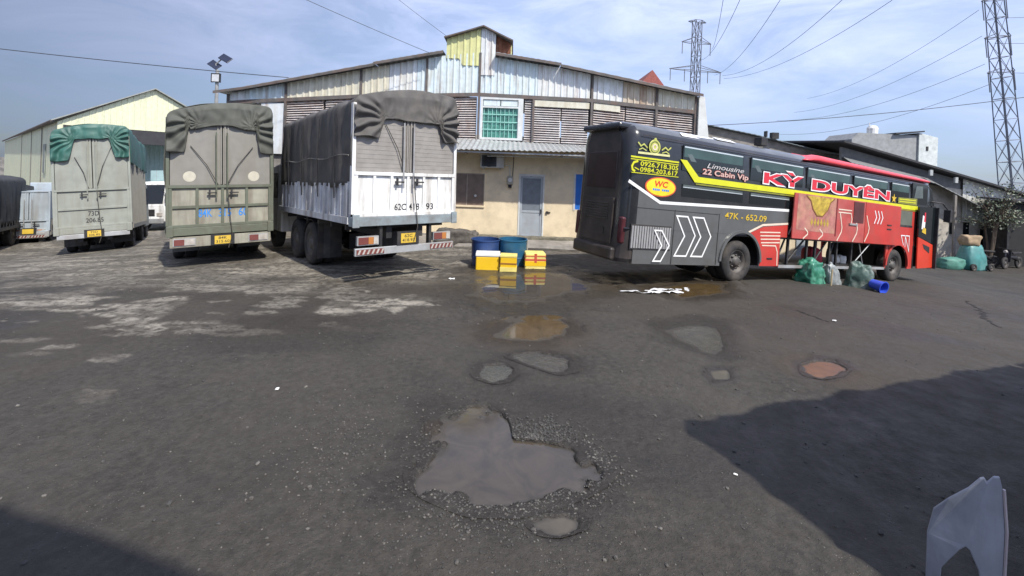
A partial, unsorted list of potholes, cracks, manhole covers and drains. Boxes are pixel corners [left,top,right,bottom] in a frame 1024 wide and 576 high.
pothole [525,509,592,539]
crack [966,301,1001,328]
pothole [403,402,618,519]
